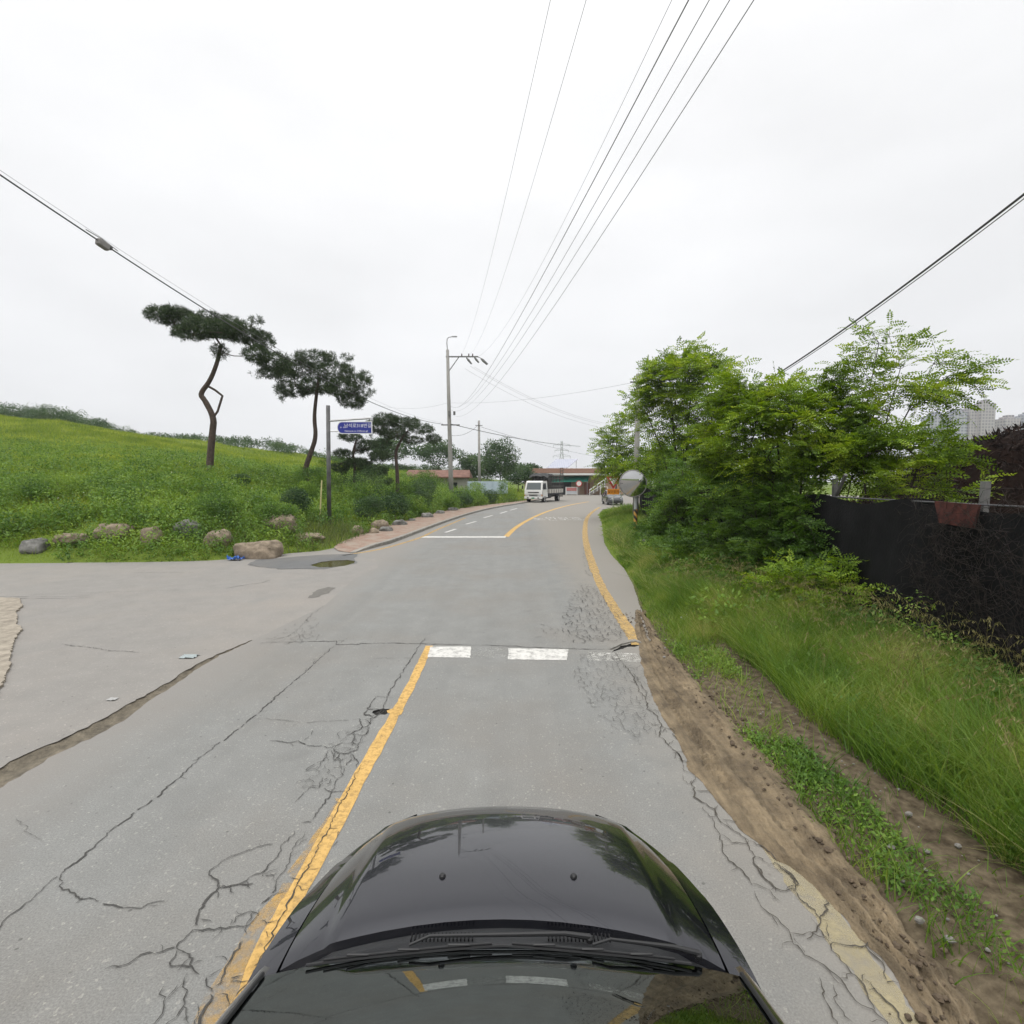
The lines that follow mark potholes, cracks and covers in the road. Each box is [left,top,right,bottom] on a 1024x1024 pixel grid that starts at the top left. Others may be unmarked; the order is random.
crack [0,547,663,1024]
crack [618,657,904,1024]
